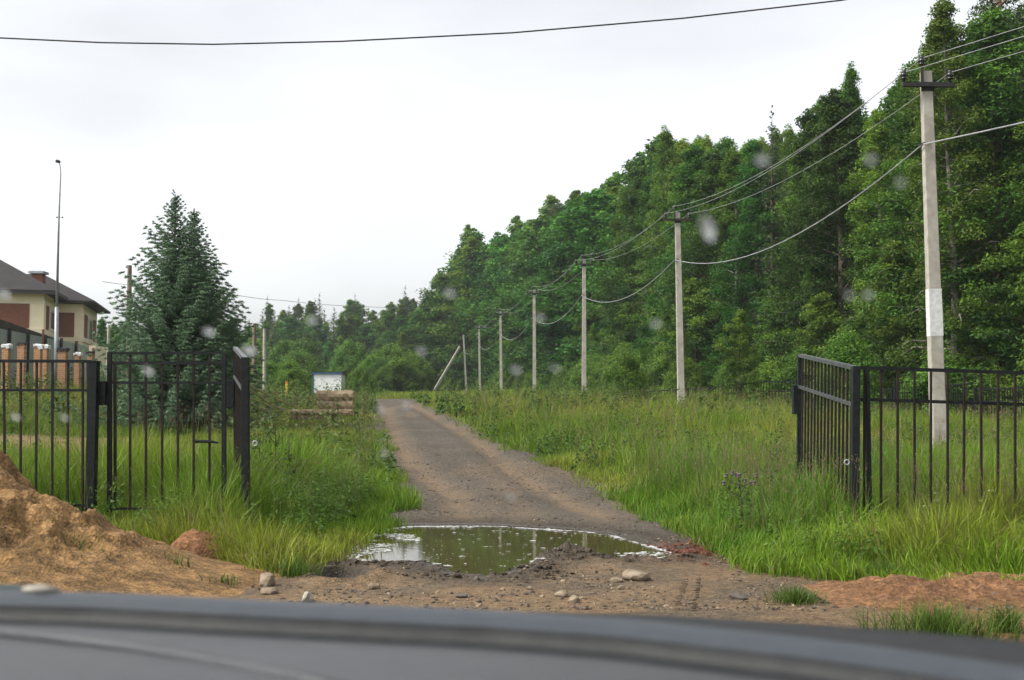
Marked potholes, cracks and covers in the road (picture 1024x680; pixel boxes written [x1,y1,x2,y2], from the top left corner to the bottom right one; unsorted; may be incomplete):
pothole [329,520,707,583]
